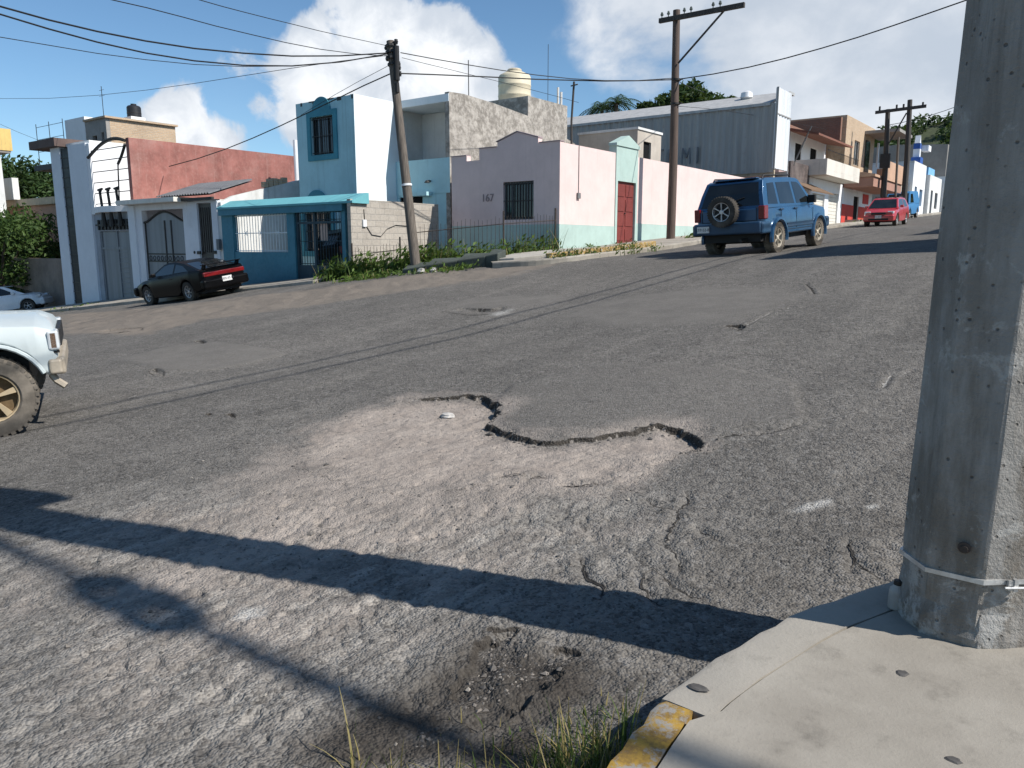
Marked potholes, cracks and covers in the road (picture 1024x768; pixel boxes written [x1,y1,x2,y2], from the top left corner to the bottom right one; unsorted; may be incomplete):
pothole [388,625,590,758]
crack [847,541,891,579]
crack [635,496,706,607]
pothole [289,394,708,498]
pothole [442,307,508,315]
crack [581,562,606,595]
